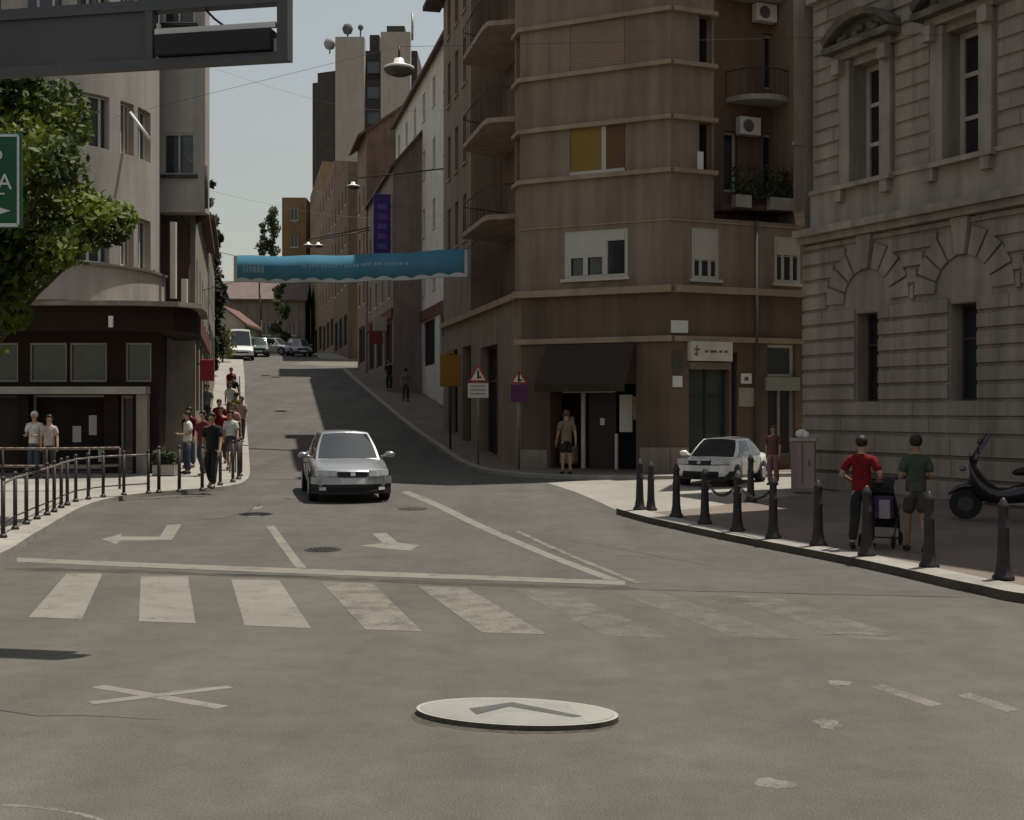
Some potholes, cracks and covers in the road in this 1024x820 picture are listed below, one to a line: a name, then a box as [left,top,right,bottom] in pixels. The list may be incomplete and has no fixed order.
crack [2,710,173,720]
